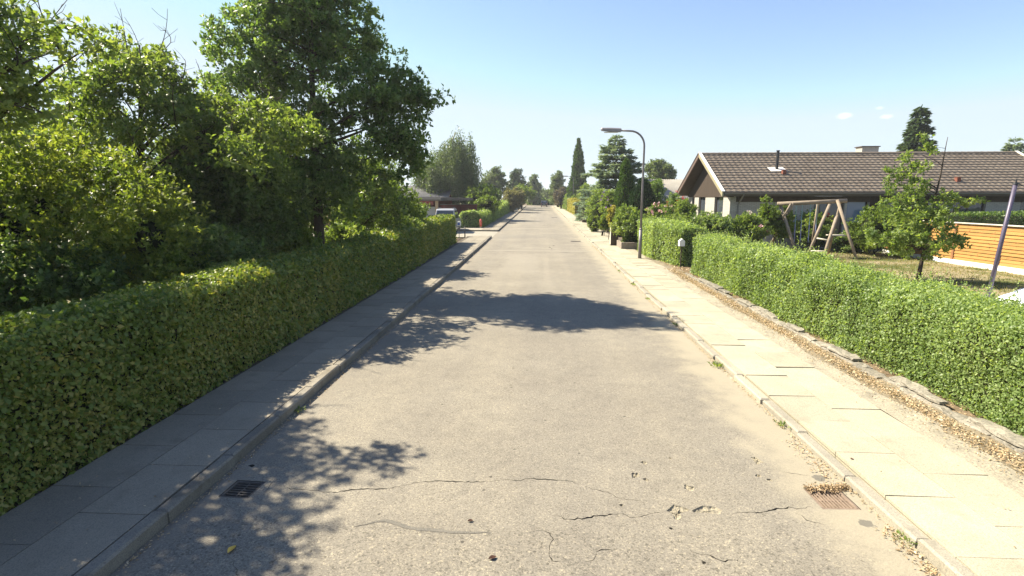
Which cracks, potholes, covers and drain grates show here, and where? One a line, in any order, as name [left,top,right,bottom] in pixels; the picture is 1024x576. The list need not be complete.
pothole [667,504,690,520]
crack [538,512,659,562]
pothole [692,506,722,514]
drain grate [219,480,265,499]
drain grate [804,489,861,510]
crack [286,478,649,503]
